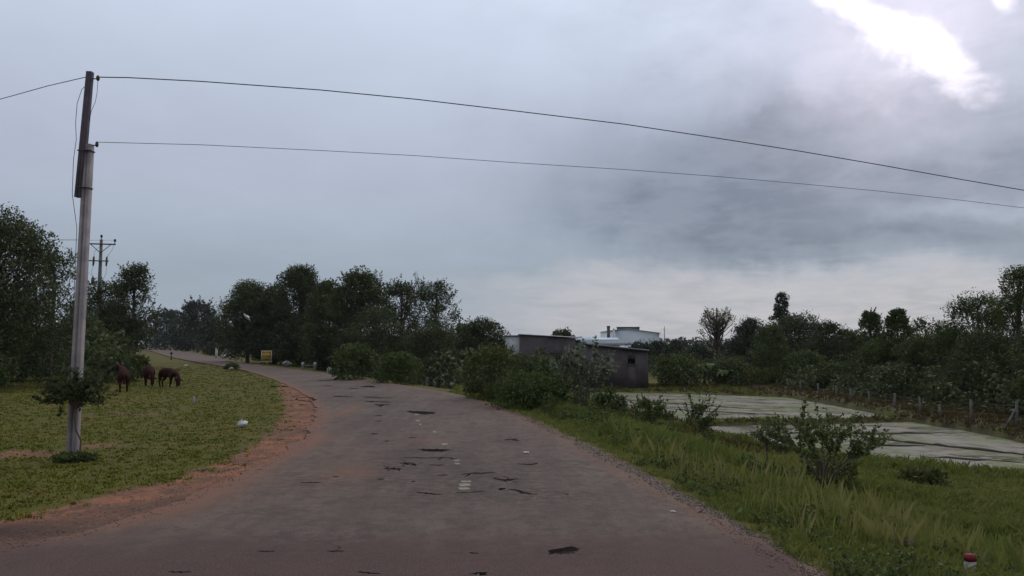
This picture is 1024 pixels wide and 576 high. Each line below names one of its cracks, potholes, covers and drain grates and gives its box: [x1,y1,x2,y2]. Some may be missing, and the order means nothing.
pothole [548,546,579,555]
